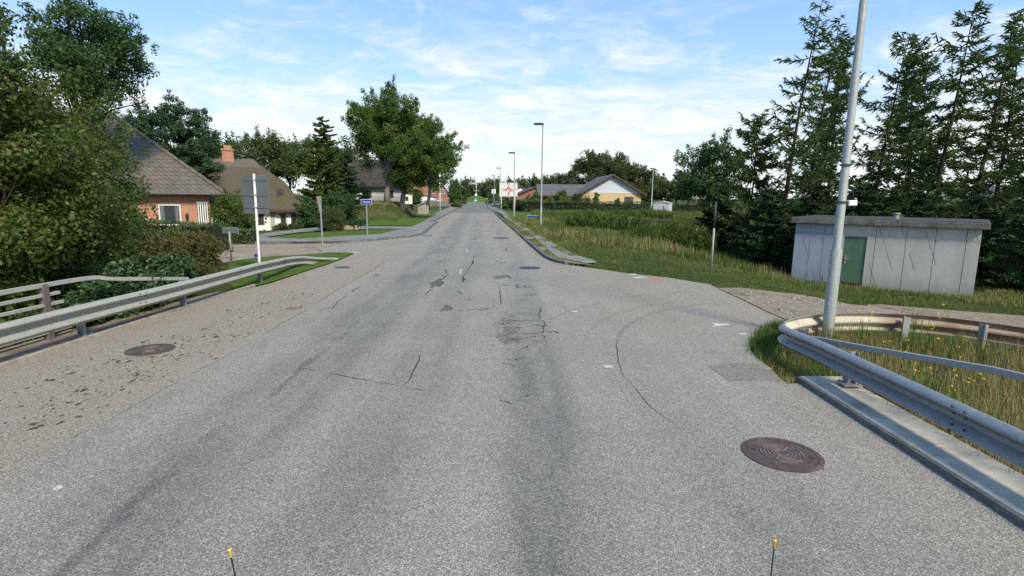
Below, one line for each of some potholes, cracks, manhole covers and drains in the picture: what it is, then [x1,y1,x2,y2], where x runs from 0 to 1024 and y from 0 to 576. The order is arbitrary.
crack [616,341,681,429]
crack [497,273,558,365]
crack [425,259,474,311]
manhole cover [124,344,176,356]
crack [302,353,433,391]
manhole cover [741,437,825,473]
